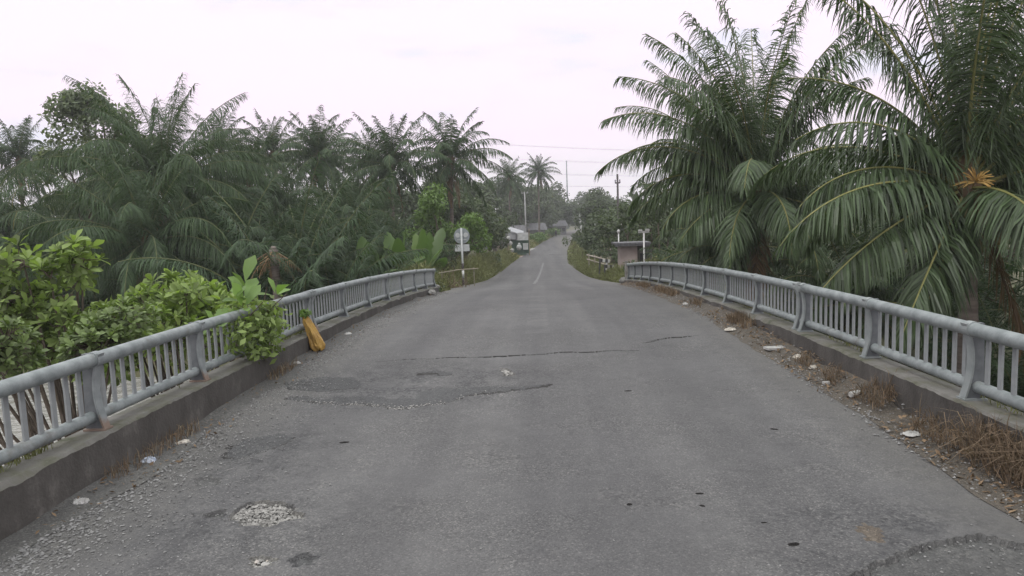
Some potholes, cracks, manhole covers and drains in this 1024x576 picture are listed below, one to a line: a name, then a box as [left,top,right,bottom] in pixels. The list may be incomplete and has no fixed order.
pothole [197,508,227,519]
crack [381,336,691,362]
pothole [227,500,307,527]
pothole [286,552,326,567]
